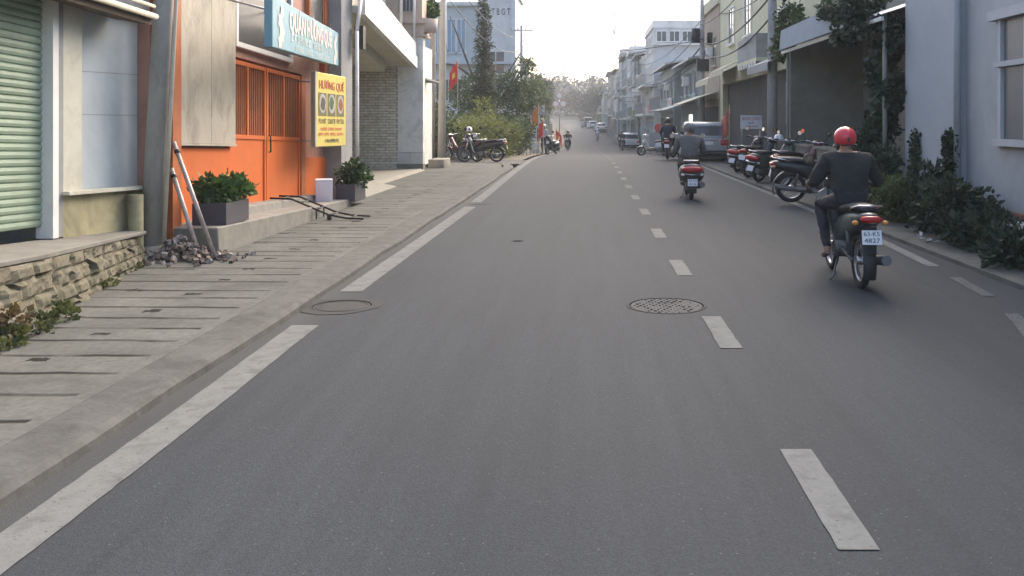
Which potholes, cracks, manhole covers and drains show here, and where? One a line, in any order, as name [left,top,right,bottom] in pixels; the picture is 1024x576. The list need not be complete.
manhole cover [627,298,707,314]
manhole cover [309,300,374,313]
